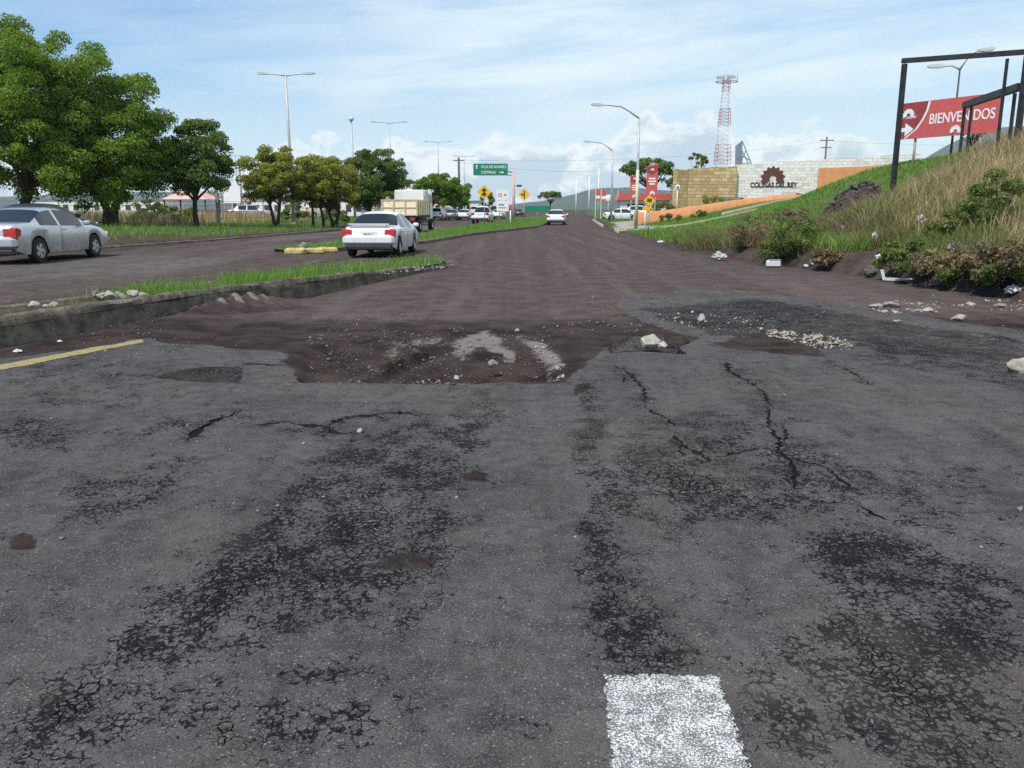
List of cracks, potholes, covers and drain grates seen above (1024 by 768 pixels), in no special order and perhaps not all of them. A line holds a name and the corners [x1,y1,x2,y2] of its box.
pothole [287,326,572,384]
crack [187,410,421,440]
pothole [607,336,691,354]
crack [819,532,963,731]
crack [608,363,893,521]
